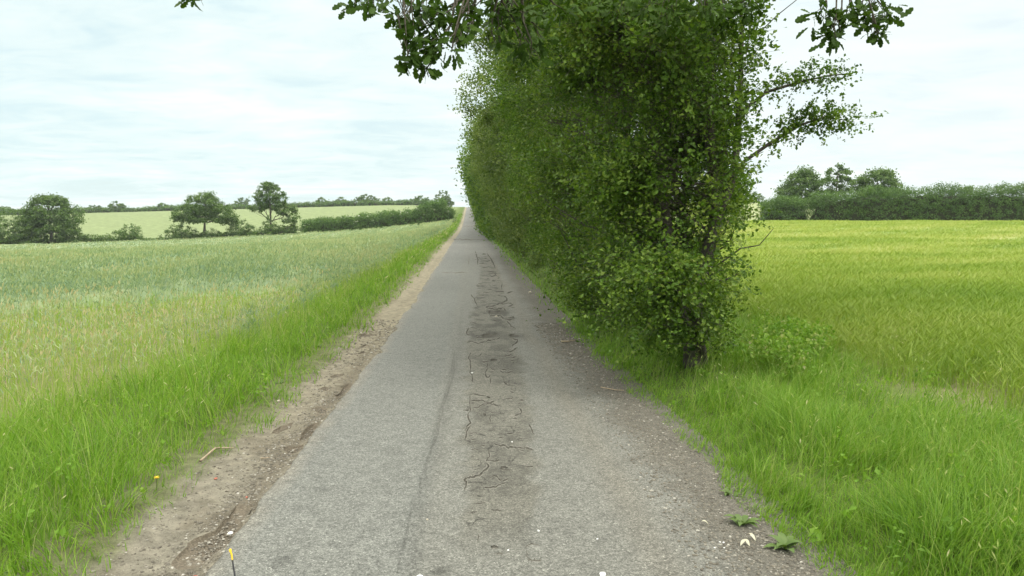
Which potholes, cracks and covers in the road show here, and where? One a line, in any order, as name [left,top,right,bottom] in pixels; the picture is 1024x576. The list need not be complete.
crack [461,251,534,555]
